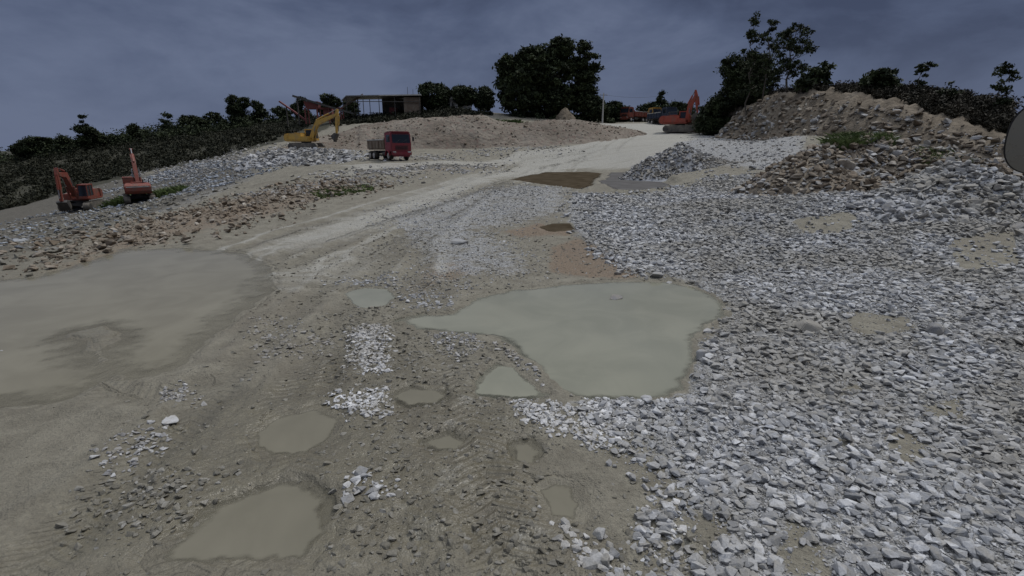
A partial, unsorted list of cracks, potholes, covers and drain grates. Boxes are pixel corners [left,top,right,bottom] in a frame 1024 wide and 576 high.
pothole [246,404,345,461]
pothole [389,383,448,405]
pothole [0,246,279,410]
pothole [138,484,336,576]
pothole [509,440,544,463]
pothole [537,222,576,232]
pothole [396,280,734,400]
pothole [529,475,592,525]
pothole [339,286,400,309]
pothole [420,435,464,450]
